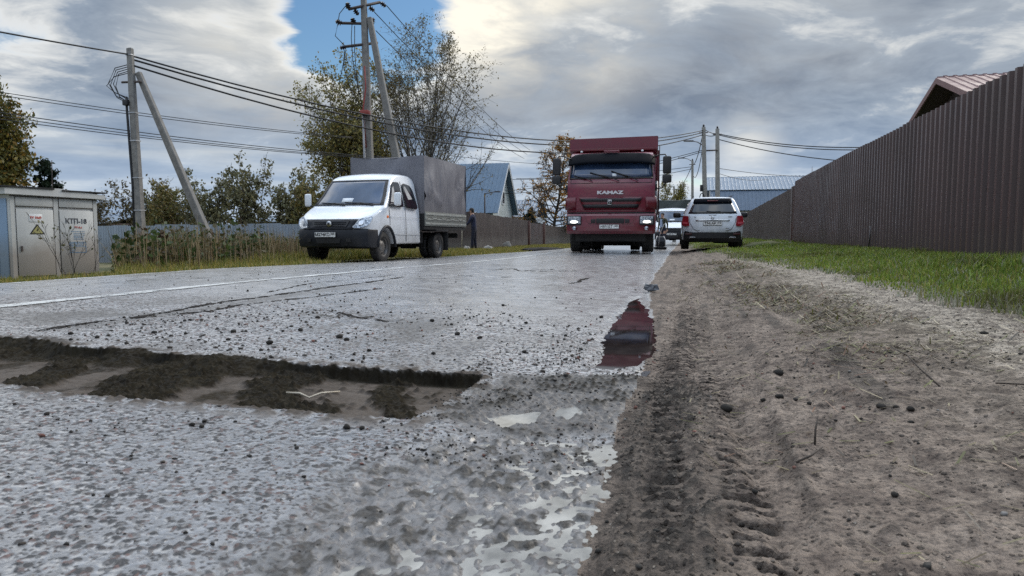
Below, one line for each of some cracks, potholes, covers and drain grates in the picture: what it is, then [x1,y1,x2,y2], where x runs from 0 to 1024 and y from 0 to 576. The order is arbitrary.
pothole [583,295,654,369]
pothole [423,373,639,444]
crack [31,274,405,332]
pothole [0,336,492,422]
